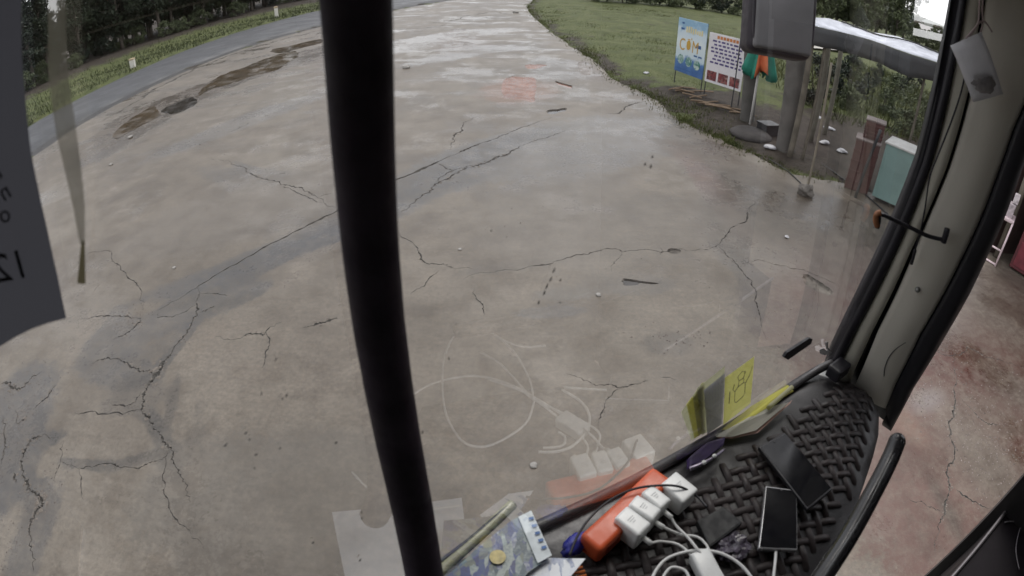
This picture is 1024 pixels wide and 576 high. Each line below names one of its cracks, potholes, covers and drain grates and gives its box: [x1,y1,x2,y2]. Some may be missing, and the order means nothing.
pothole [159,95,198,114]
crack [212,159,334,207]
crack [399,200,847,338]
crack [53,250,337,548]
crack [569,374,675,423]
crack [0,371,56,570]
crack [401,117,559,212]
